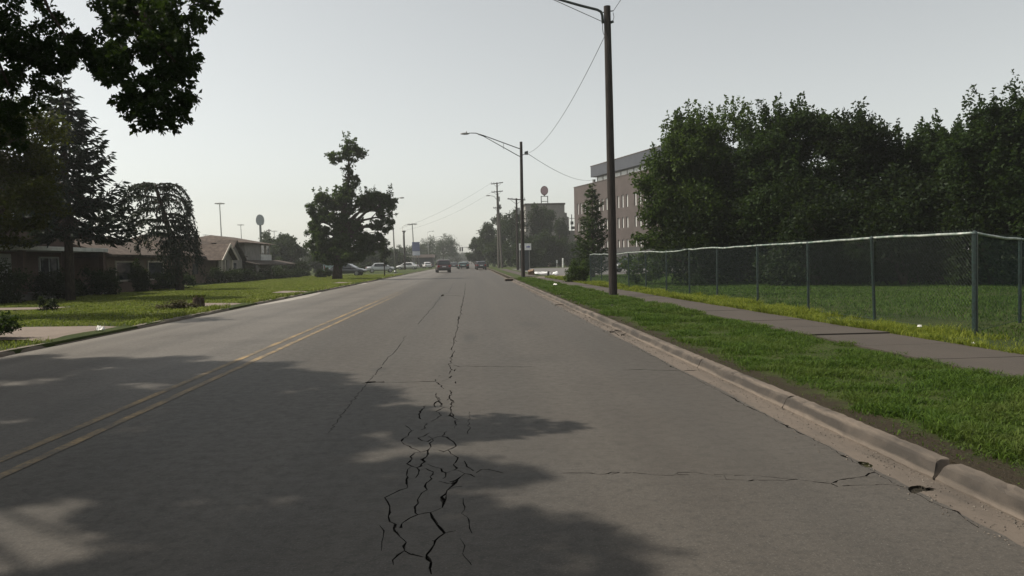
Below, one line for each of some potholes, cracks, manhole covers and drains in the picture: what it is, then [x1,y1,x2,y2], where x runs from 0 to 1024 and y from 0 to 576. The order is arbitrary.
pothole [908,485,934,494]
crack [592,332,979,528]
crack [365,284,502,574]
